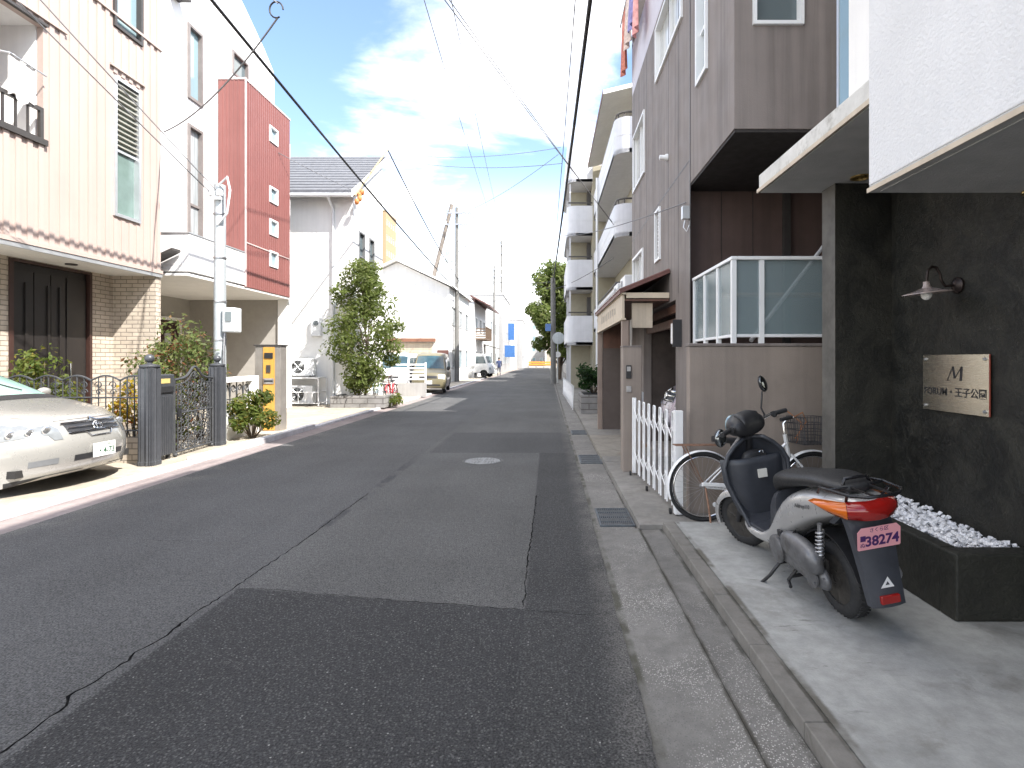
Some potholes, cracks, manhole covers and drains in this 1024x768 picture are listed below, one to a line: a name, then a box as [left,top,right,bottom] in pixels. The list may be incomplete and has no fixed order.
crack [0,495,595,754]
drain grate [578,455,603,464]
manhole cover [462,457,503,465]
drain grate [595,508,636,527]
